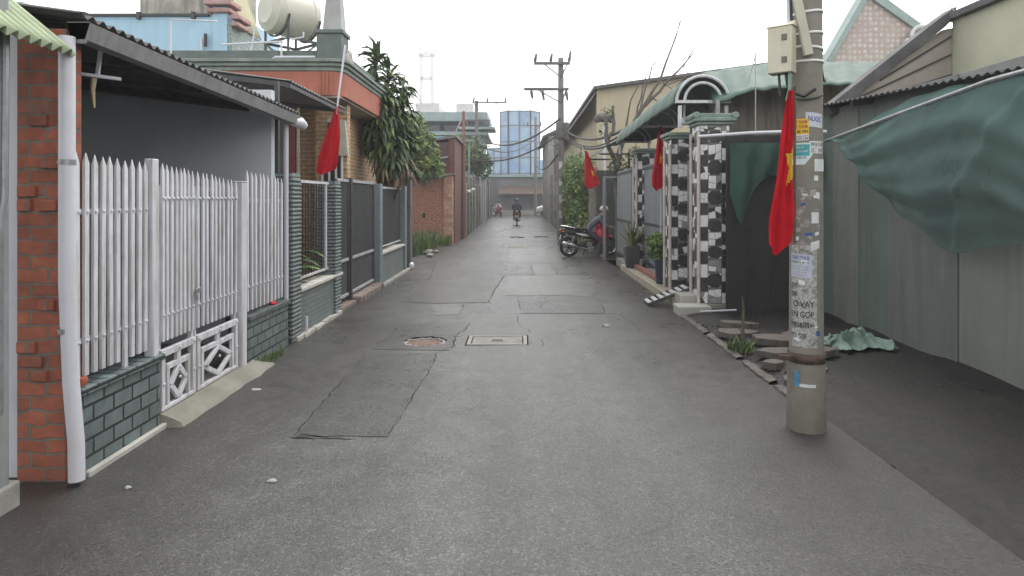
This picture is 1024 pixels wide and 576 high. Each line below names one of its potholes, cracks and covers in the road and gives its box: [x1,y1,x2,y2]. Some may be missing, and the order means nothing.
manhole cover [466,335,529,346]
crack [287,270,503,440]
manhole cover [404,337,446,346]
